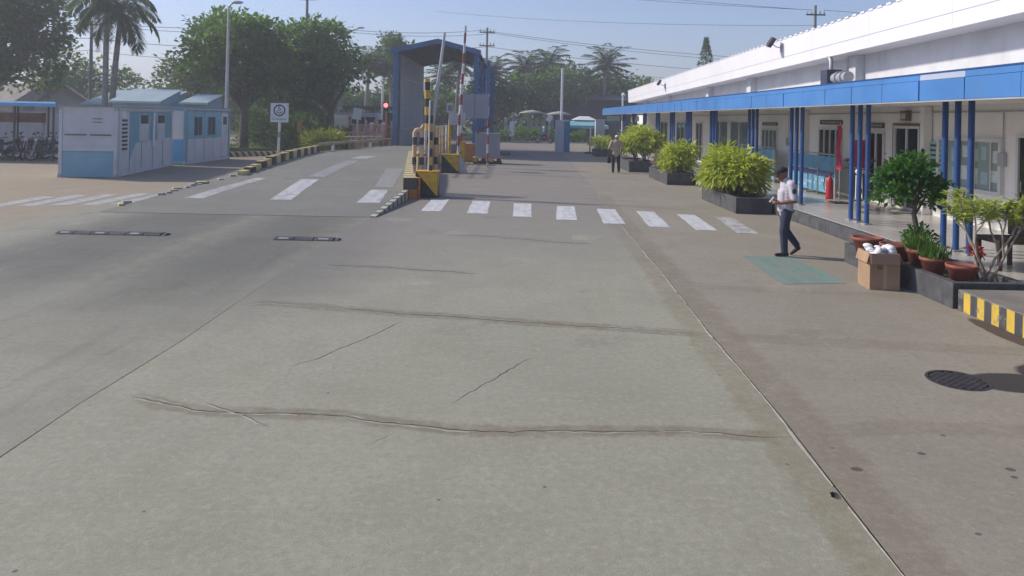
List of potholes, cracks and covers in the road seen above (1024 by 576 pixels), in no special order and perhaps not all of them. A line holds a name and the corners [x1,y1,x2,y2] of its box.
crack [135,359,790,441]
manhole cover [925,370,992,391]
crack [244,303,704,335]
